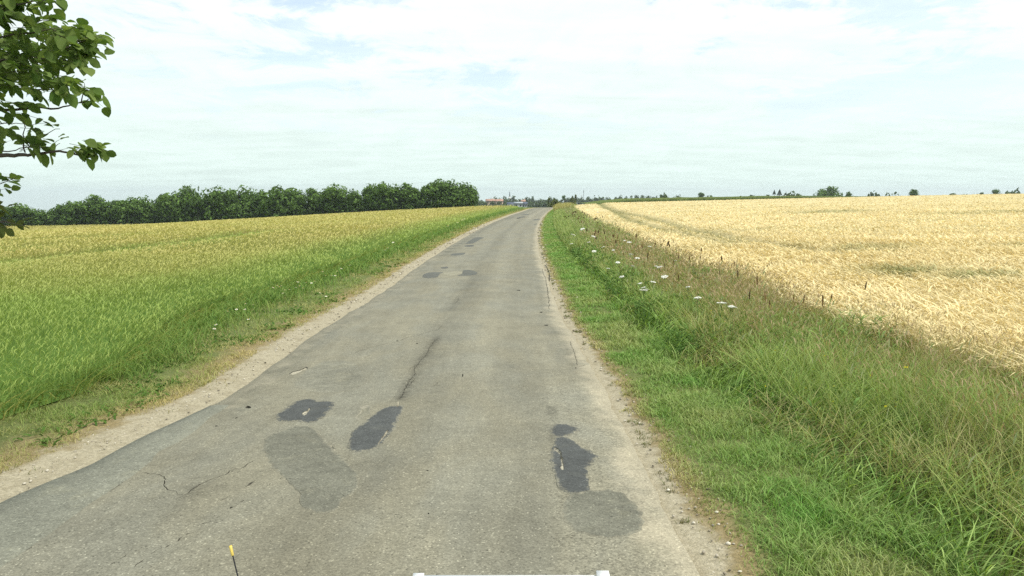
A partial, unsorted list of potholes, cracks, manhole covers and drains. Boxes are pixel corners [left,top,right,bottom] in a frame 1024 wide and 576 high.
crack [144,461,281,506]
crack [355,330,439,399]
